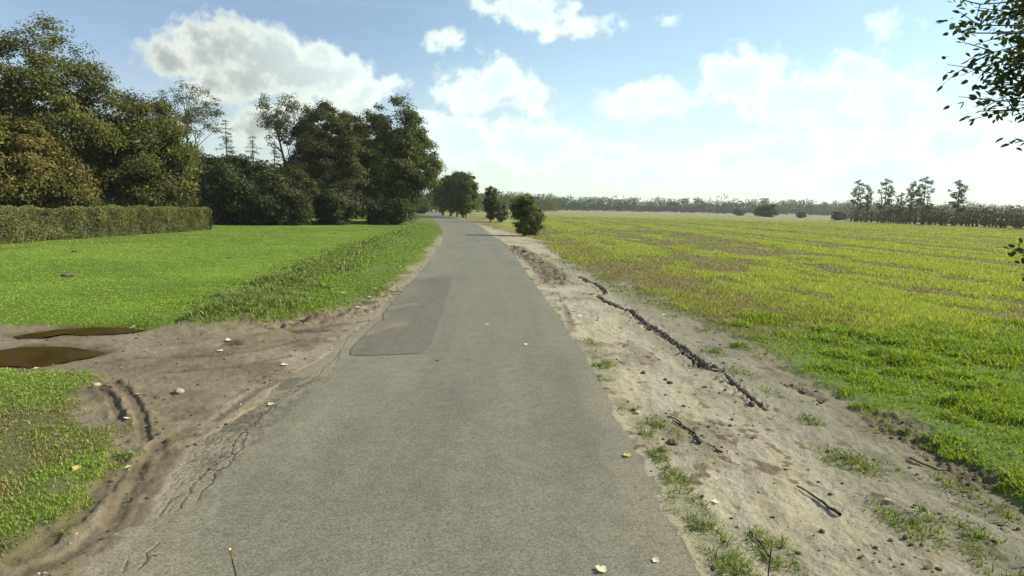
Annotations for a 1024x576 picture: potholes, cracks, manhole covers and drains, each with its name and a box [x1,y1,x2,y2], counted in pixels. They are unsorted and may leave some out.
crack [159,324,367,516]
crack [122,542,160,573]
